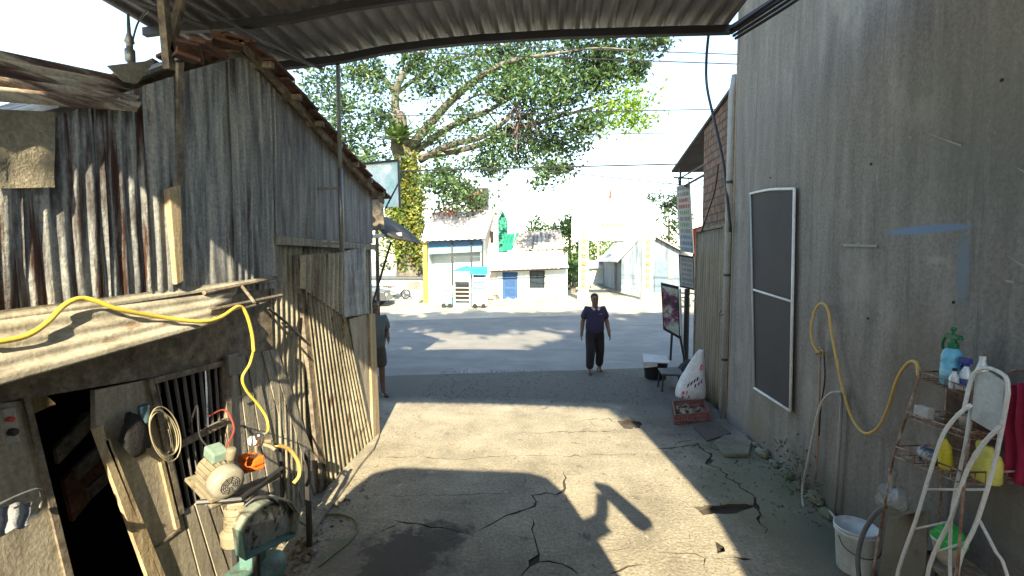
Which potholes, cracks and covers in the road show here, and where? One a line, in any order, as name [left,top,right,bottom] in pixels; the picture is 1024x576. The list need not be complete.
pothole [618,419,642,429]
crack [651,440,768,533]
pothole [694,504,752,515]
crack [370,471,579,576]
